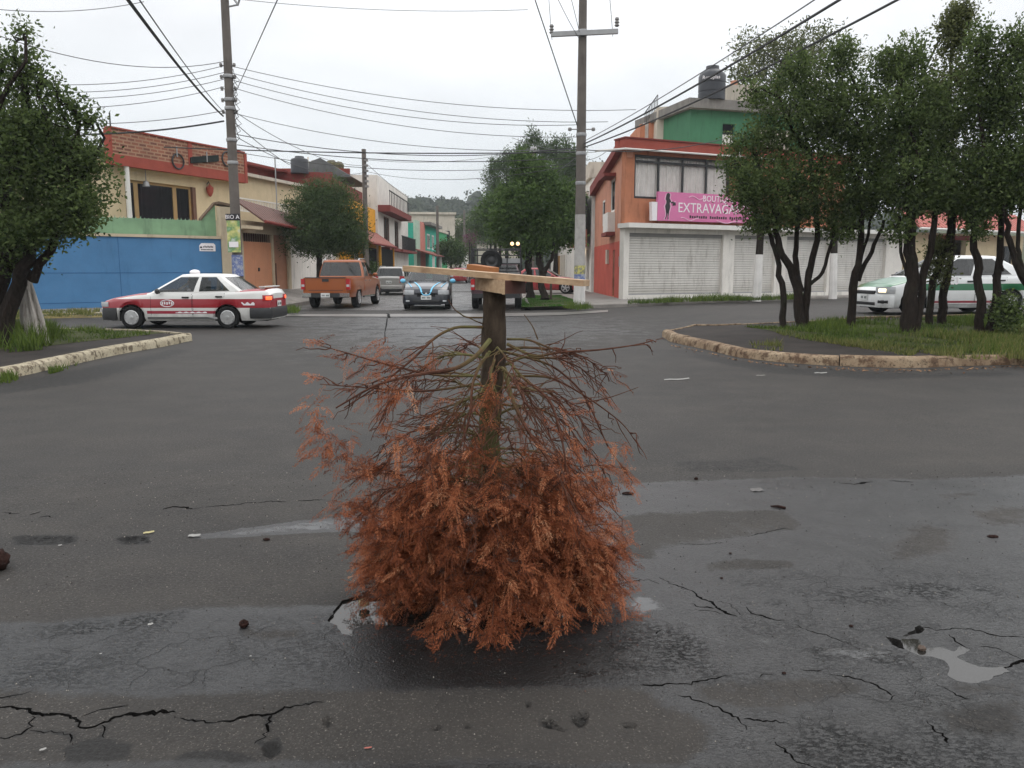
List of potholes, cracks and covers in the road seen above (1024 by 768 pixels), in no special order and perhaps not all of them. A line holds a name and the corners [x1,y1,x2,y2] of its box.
pothole [886,637,903,649]
crack [164,499,318,509]
pothole [902,639,1010,683]
crack [0,691,325,743]
crack [629,577,849,644]
crack [640,675,788,730]
crack [775,742,815,768]
crack [924,627,1024,669]
crack [800,669,895,701]
pothole [327,591,573,636]
